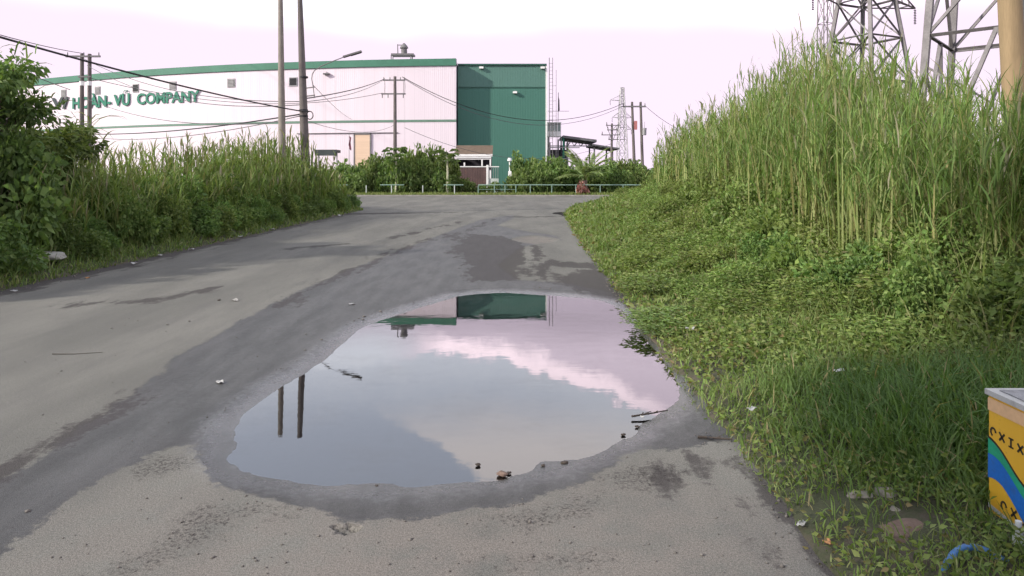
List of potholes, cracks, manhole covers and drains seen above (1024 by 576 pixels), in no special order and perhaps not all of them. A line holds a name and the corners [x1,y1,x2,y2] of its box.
pothole [194,287,714,521]
